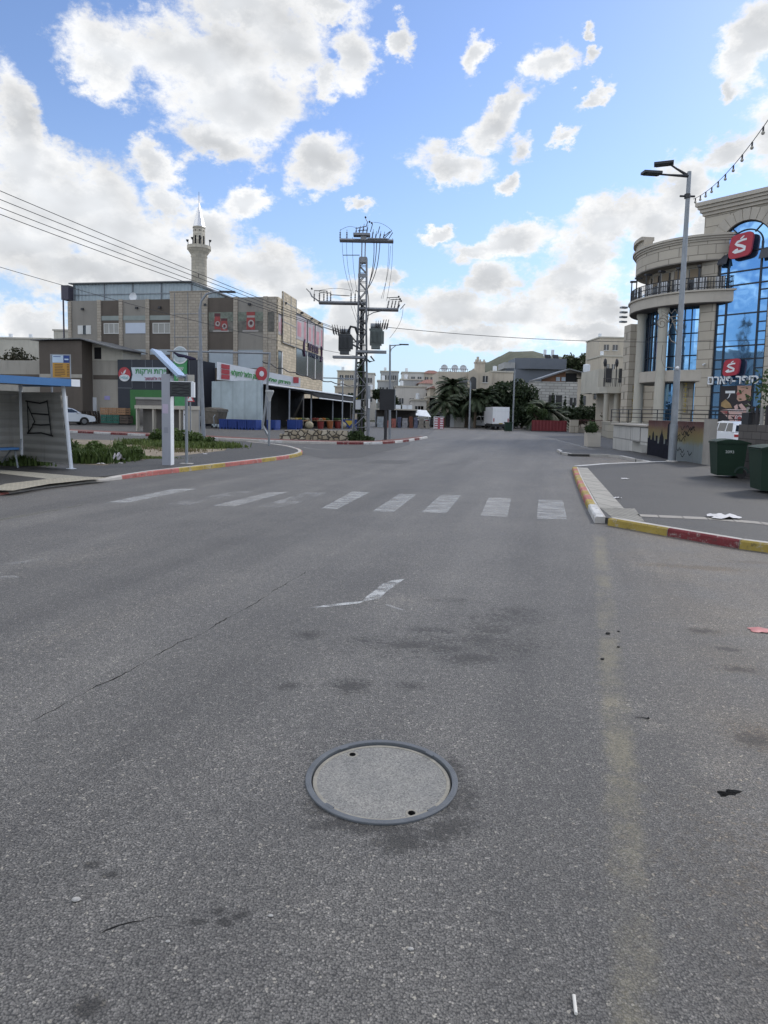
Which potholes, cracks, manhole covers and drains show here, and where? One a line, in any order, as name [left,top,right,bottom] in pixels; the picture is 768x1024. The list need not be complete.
crack [100,916,160,934]
manhole cover [305,740,458,825]
crack [33,572,306,721]
